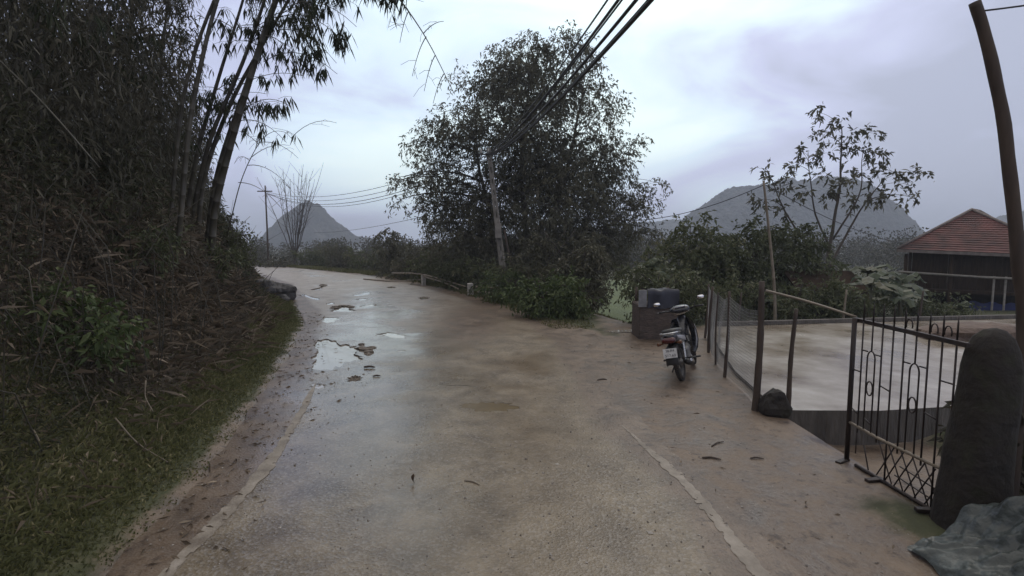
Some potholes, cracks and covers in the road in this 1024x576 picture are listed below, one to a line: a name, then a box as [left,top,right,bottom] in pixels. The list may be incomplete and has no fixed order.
pothole [460,402,520,412]
pothole [311,339,376,370]
